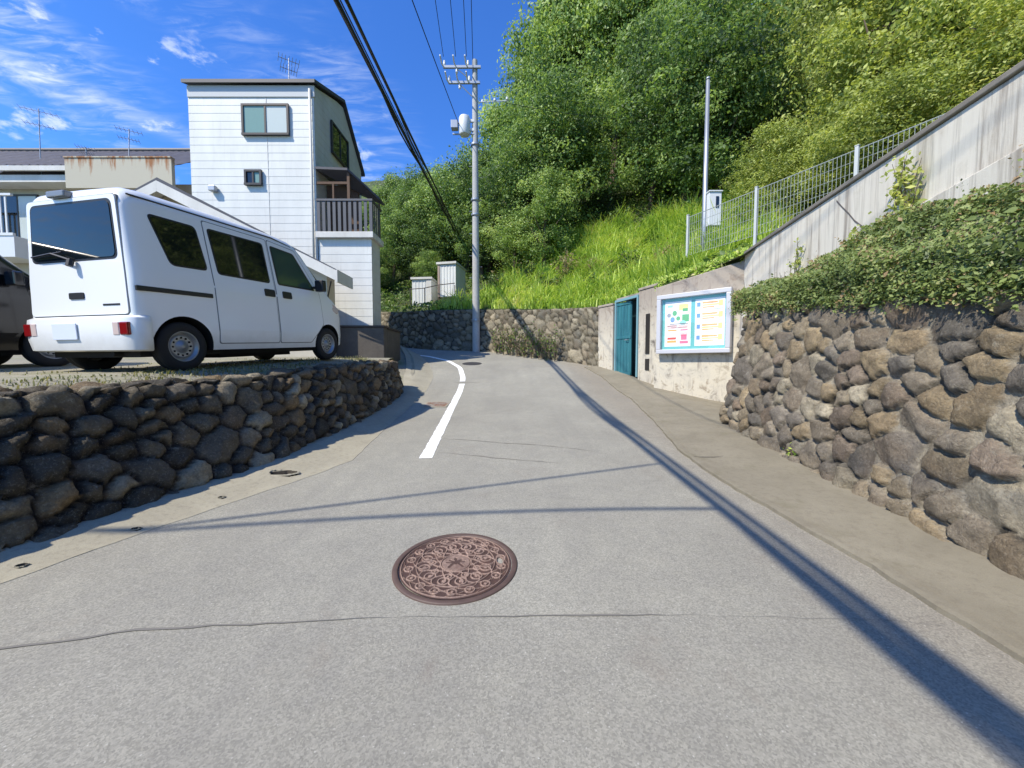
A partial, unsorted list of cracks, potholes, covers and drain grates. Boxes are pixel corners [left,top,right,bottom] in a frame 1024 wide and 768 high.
manhole cover [392,533,517,606]
crack [443,438,590,463]
